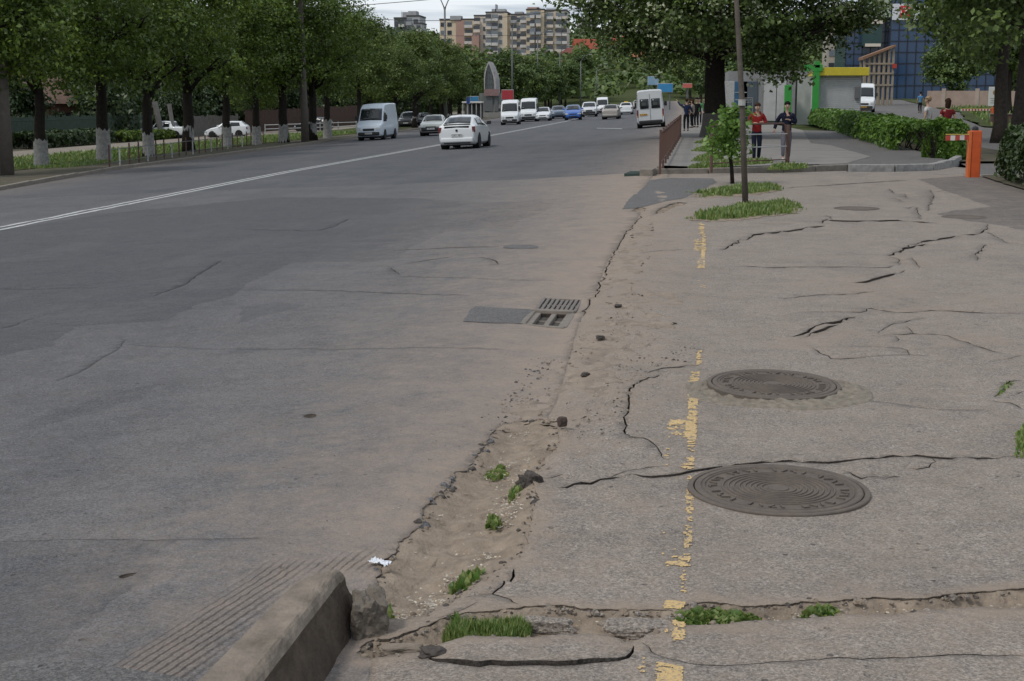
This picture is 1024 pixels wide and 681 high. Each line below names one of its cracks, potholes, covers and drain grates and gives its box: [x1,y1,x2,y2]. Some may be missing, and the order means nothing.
manhole cover [687,464,871,517]
crack [623,366,684,458]
drain grate [520,298,581,329]
crack [552,455,1002,488]
crack [751,224,1018,360]
crack [582,216,641,315]
crack [431,648,633,667]
manhole cover [686,369,874,410]
crack [724,190,934,250]
